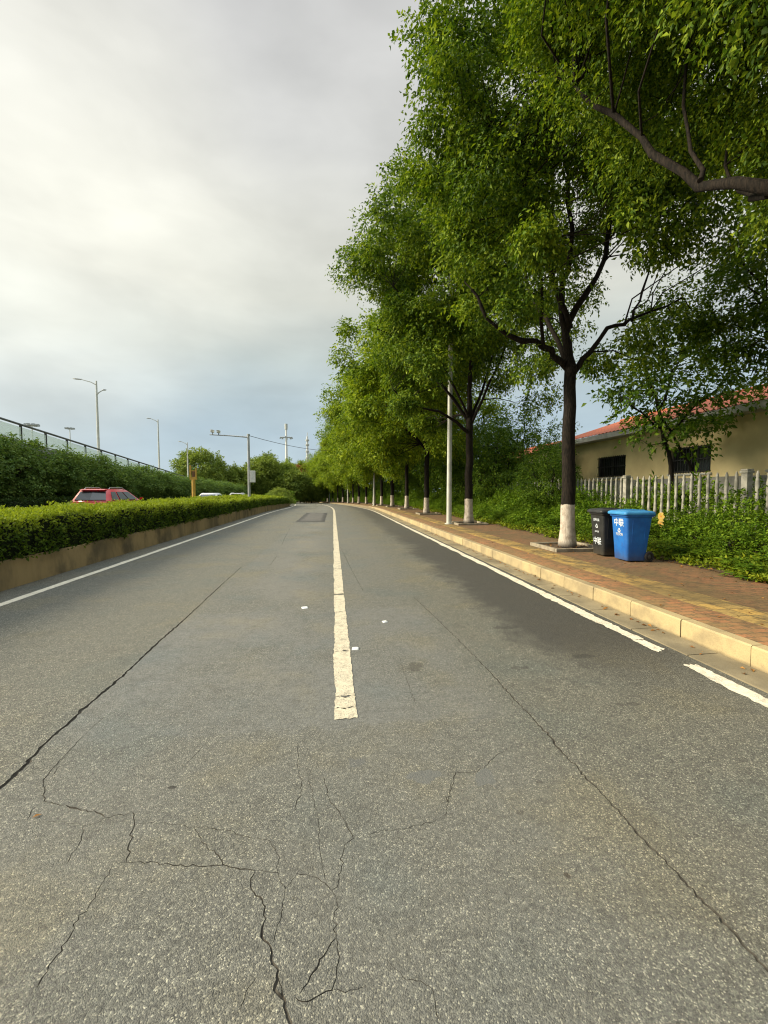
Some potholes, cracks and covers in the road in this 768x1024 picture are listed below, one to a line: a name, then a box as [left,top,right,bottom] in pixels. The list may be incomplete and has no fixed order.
crack [367,746,512,835]
crack [391,965,440,1020]
crack [28,718,366,1024]
